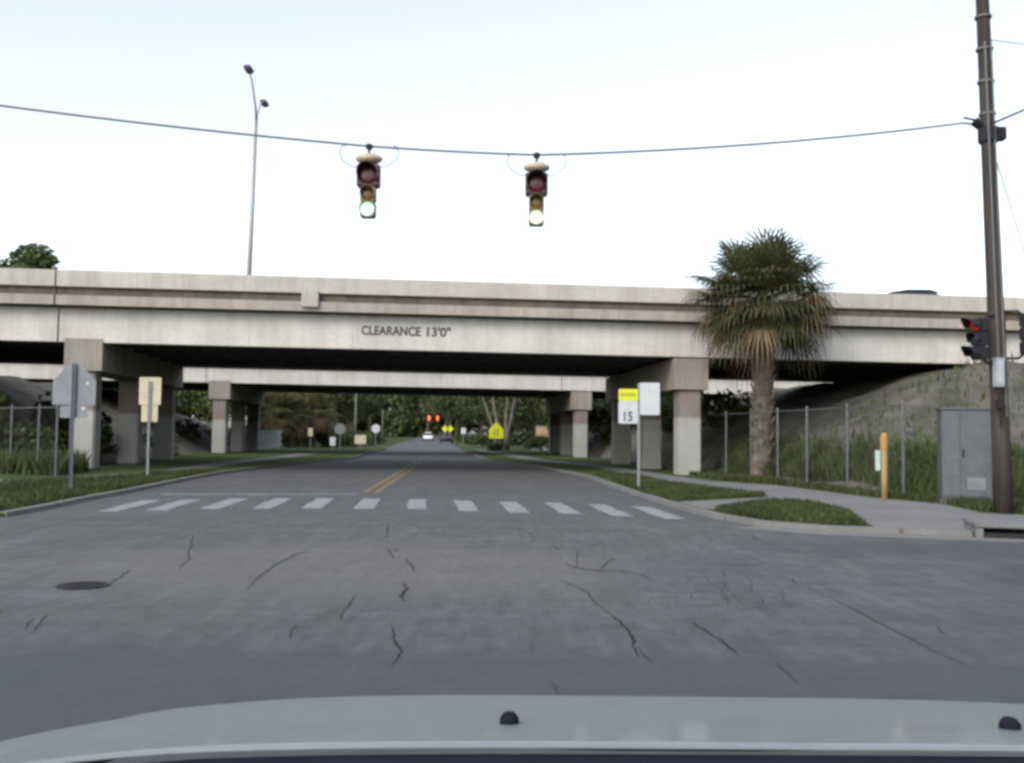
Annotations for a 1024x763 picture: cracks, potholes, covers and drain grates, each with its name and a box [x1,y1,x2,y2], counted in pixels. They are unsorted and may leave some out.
crack [386,525,509,601]
crack [246,552,306,590]
crack [391,625,403,665]
crack [552,544,809,663]
manhole cover [56,581,110,590]
